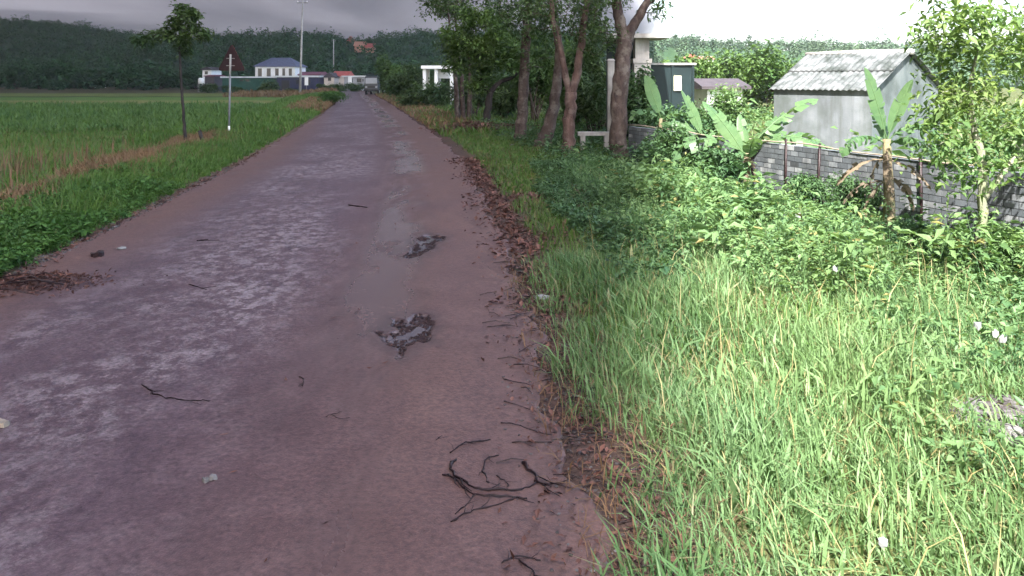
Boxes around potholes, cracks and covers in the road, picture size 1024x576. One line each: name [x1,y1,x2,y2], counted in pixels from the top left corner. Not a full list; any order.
pothole [402,234,445,259]
pothole [376,313,435,359]
